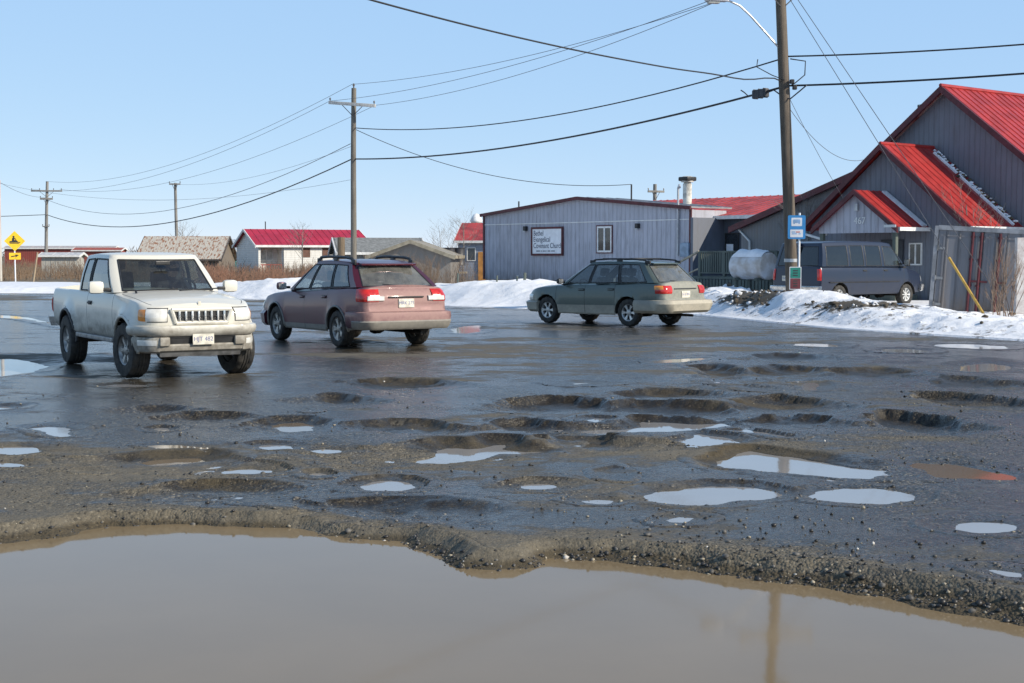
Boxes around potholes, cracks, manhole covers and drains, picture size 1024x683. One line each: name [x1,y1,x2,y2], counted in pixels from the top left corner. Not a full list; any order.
pothole [673,363,782,384]
pothole [328,377,466,391]
pothole [594,398,756,421]
pothole [876,454,1024,484]
pothole [676,442,934,484]
pothole [845,408,982,436]
pothole [300,392,375,405]
pothole [490,394,619,414]
pothole [163,409,258,423]
pothole [122,404,198,415]
pothole [902,390,1024,413]
pothole [775,482,957,508]
